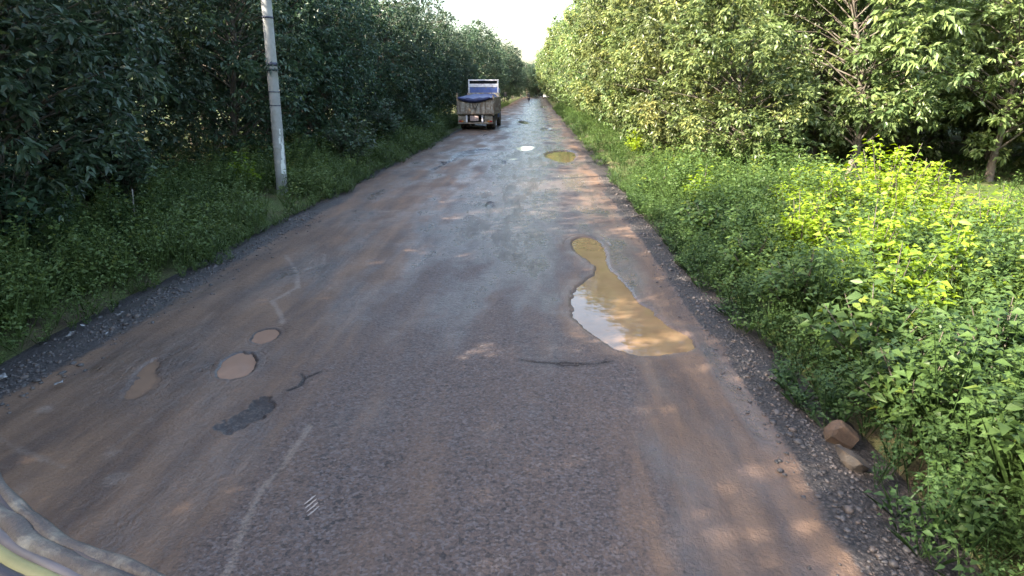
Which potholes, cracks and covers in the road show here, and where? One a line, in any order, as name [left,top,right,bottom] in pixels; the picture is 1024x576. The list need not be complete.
pothole [108,354,172,405]
crack [281,369,326,394]
pothole [210,349,266,383]
pothole [246,326,285,346]
crack [512,356,618,370]
pothole [560,235,710,361]
pothole [538,150,582,163]
